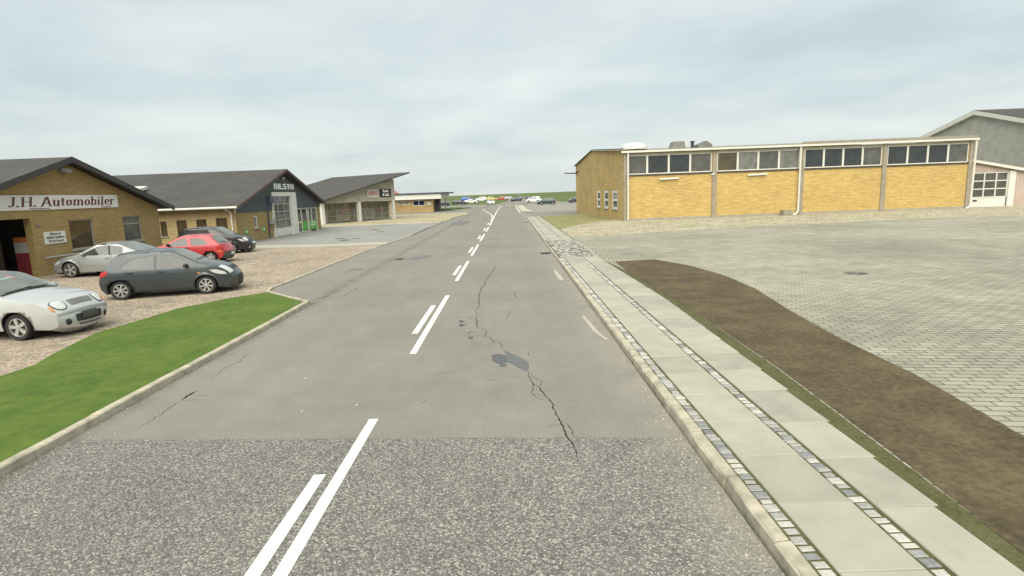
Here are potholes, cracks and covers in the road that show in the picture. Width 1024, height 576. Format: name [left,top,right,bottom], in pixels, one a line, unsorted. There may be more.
crack [140,351,253,427]
crack [528,372,578,461]
crack [469,268,516,360]
